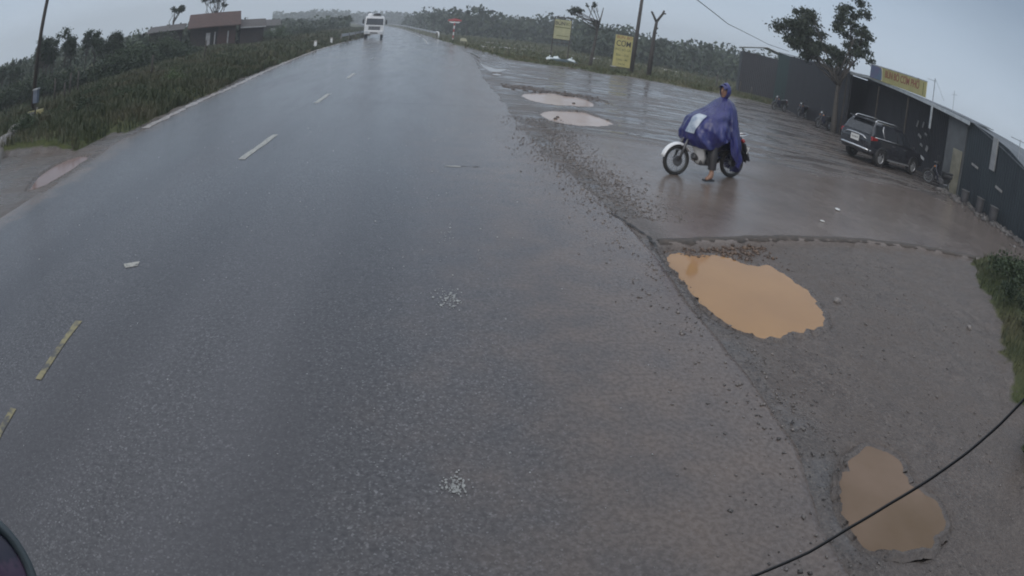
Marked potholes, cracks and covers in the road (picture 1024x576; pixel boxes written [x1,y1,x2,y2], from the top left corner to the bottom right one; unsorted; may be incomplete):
pothole [830,442,952,563]
pothole [536,110,618,127]
pothole [660,250,832,344]
pothole [518,92,597,107]
